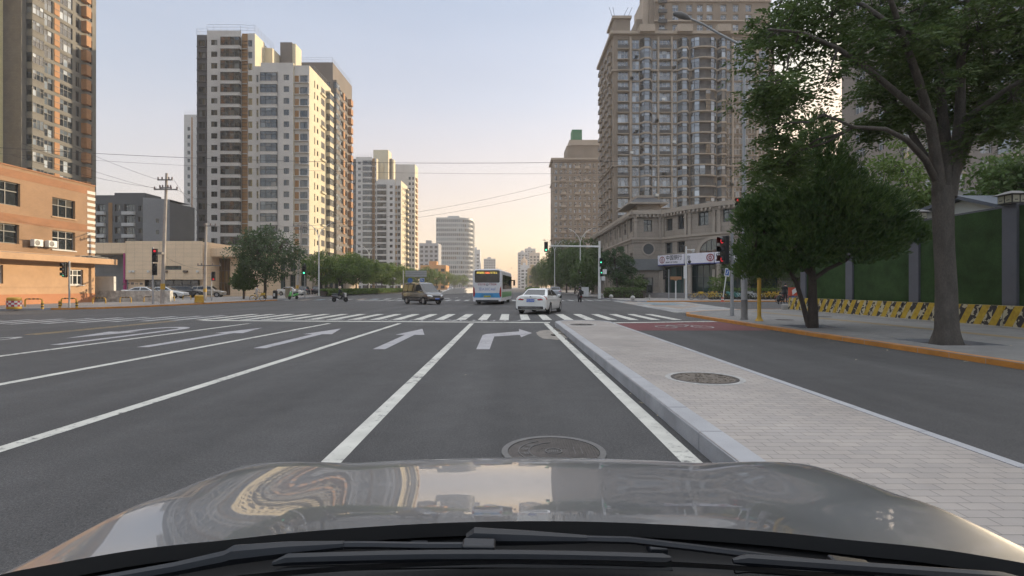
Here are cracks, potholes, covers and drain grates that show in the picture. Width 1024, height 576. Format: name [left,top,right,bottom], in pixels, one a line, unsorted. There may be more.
manhole cover [502,436,606,459]
manhole cover [665,372,746,385]
